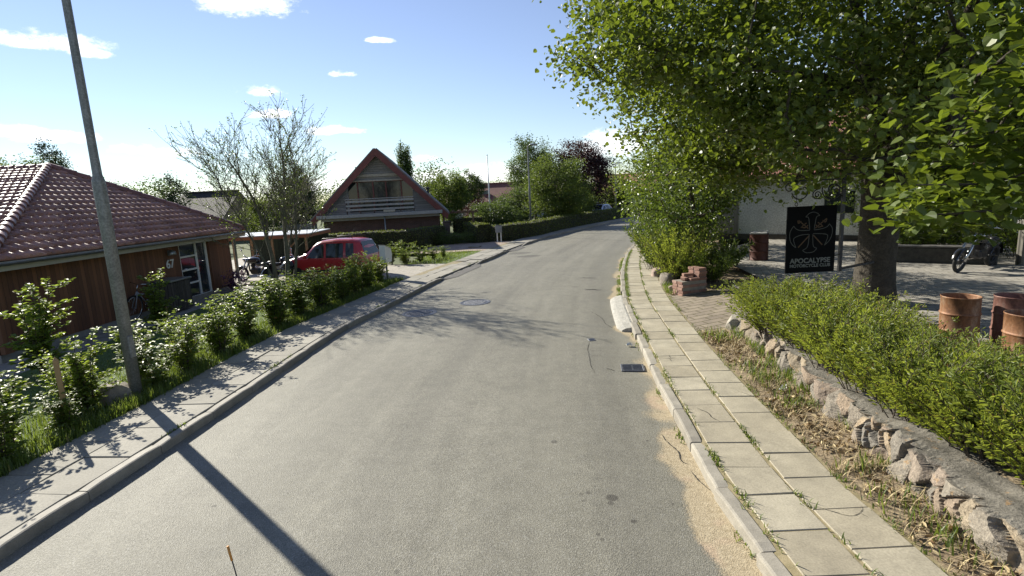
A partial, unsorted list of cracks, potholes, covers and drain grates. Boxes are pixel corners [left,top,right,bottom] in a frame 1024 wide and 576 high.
drain grate [620,364,646,372]
crack [662,435,710,490]
manhole cover [402,309,437,317]
